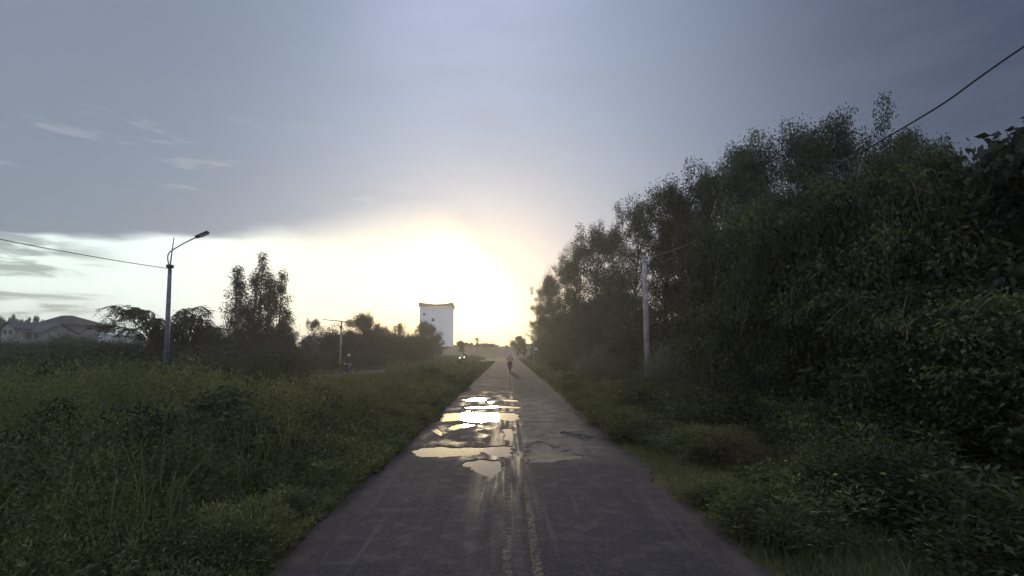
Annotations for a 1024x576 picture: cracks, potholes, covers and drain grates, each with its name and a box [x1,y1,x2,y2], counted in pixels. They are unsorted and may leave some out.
pothole [522,441,587,463]
pothole [559,430,605,442]
pothole [462,458,505,476]
